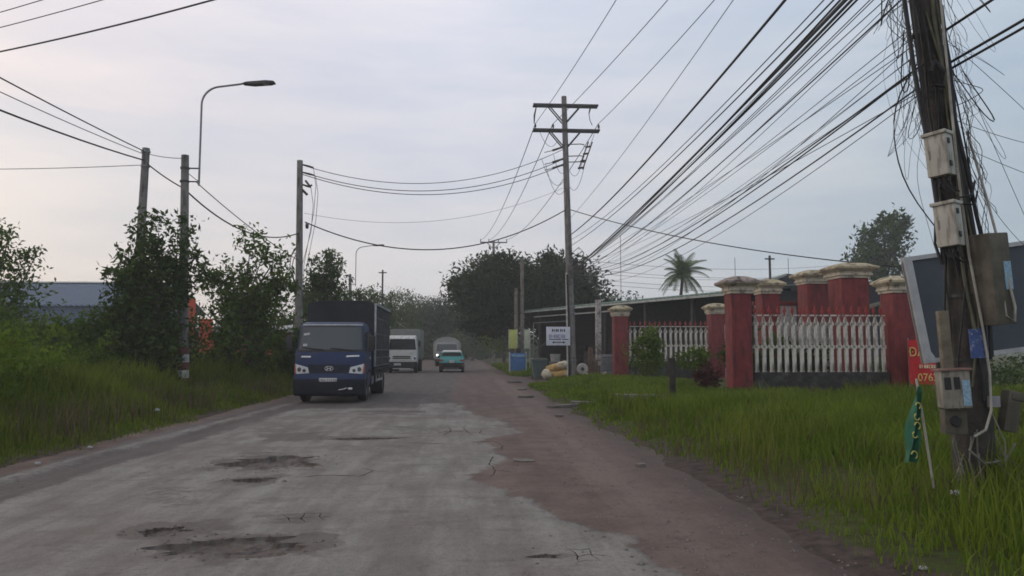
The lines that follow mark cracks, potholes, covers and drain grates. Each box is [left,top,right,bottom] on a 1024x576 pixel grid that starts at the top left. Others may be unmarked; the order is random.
pothole [214,455,321,470]
pothole [137,527,195,537]
crack [423,427,504,477]
crack [564,548,606,562]
crack [276,513,327,522]
pothole [140,536,308,559]
